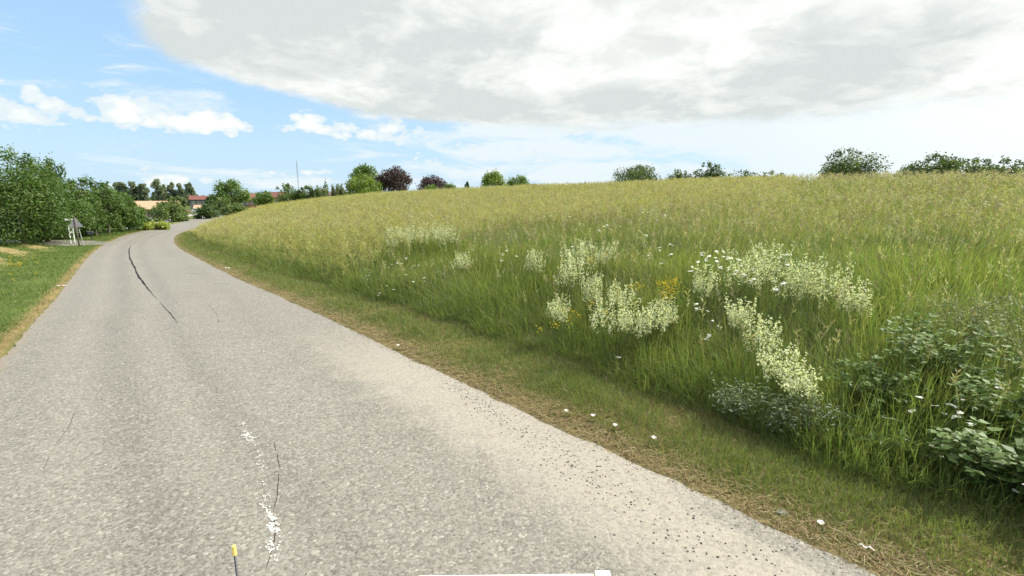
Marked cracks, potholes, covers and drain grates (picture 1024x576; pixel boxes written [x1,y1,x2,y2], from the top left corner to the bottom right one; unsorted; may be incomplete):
crack [265,444,279,571]
crack [111,232,177,322]
